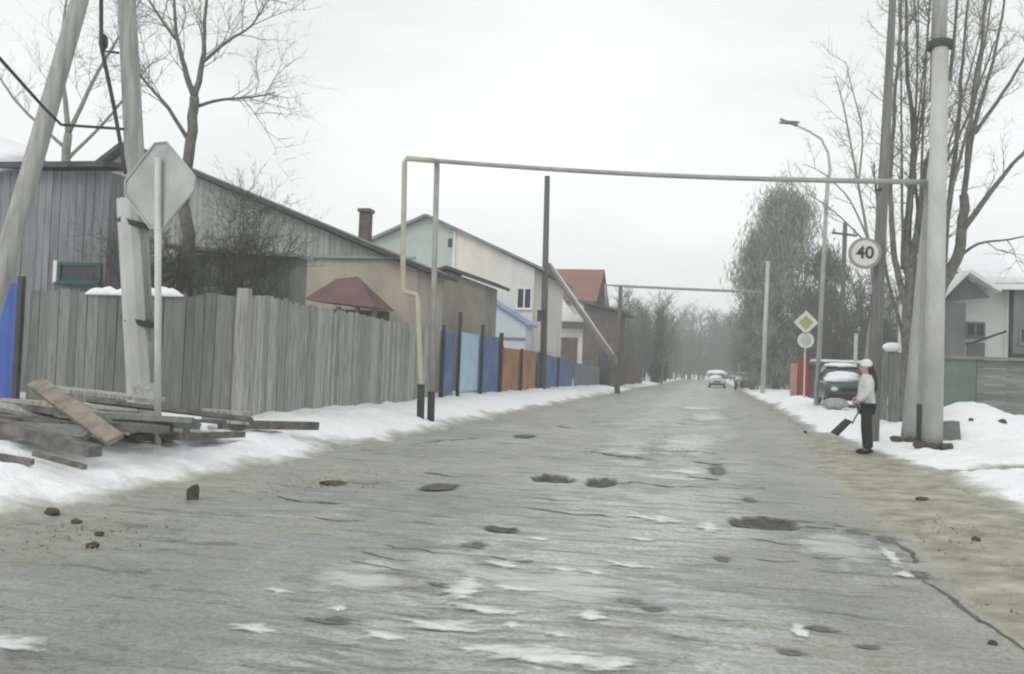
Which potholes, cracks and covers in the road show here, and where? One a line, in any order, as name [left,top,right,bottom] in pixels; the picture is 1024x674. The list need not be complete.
pothole [532,473,574,483]
pothole [729,516,795,531]
crack [922,580,1024,649]
pothole [586,478,616,488]
crack [894,541,919,563]
